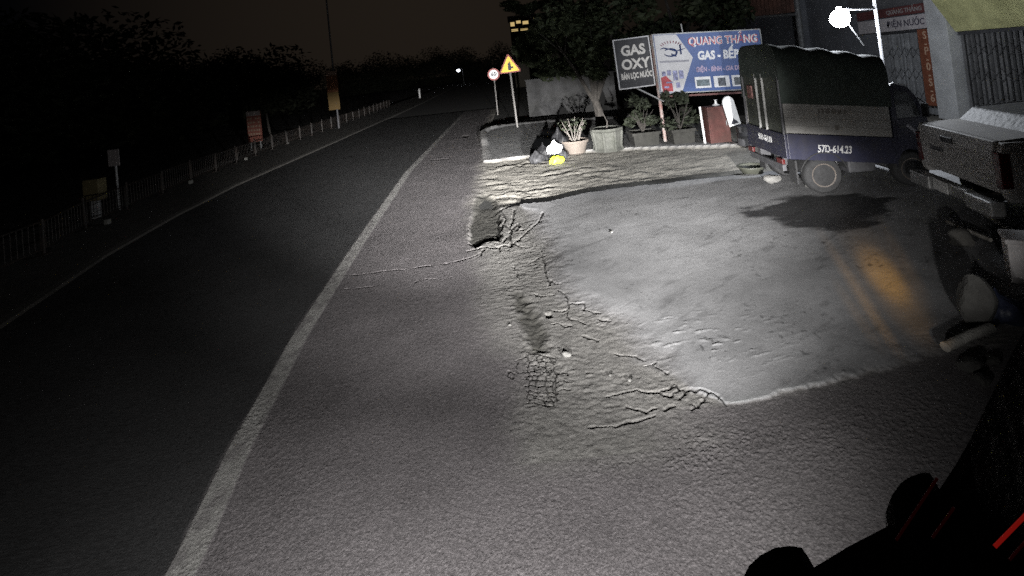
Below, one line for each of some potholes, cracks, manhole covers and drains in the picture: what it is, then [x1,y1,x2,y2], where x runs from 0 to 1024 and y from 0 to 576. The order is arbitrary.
pothole [464,192,505,251]
crack [343,197,671,408]
